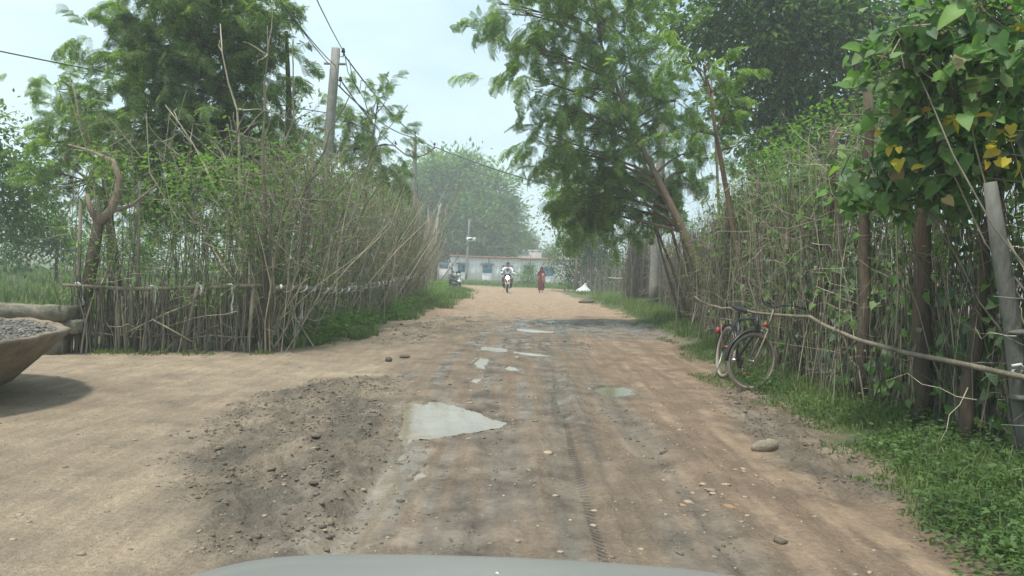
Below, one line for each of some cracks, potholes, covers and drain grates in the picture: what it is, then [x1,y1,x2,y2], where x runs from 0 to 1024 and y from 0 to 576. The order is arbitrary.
pothole [393,400,511,464]
pothole [470,357,494,370]
pothole [589,385,640,398]
